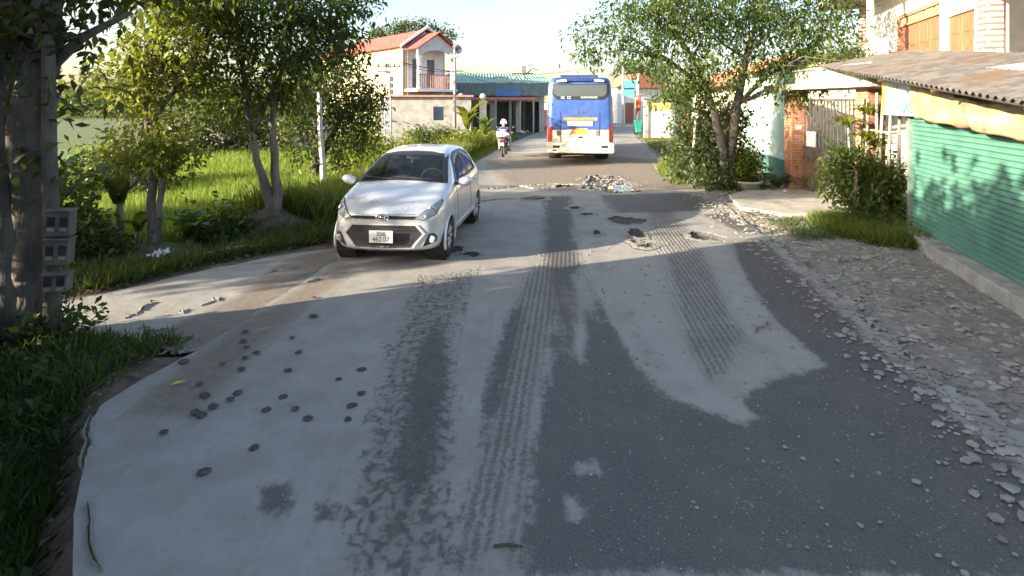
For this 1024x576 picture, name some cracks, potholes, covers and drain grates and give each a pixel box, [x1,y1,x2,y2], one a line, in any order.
pothole [681,231,726,242]
crack [78,413,95,473]
pothole [630,242,664,250]
pothole [622,228,651,240]
crack [85,500,102,574]
pothole [578,174,644,195]
pothole [602,215,653,227]
